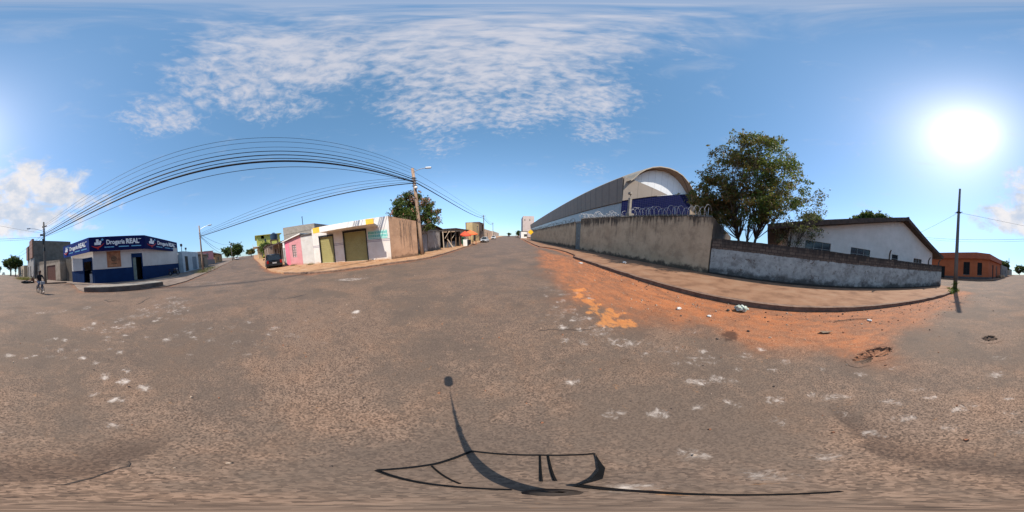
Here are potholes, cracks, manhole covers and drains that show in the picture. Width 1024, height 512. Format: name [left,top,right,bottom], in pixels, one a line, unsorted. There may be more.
pothole [975,334,1003,343]
pothole [844,344,899,368]
